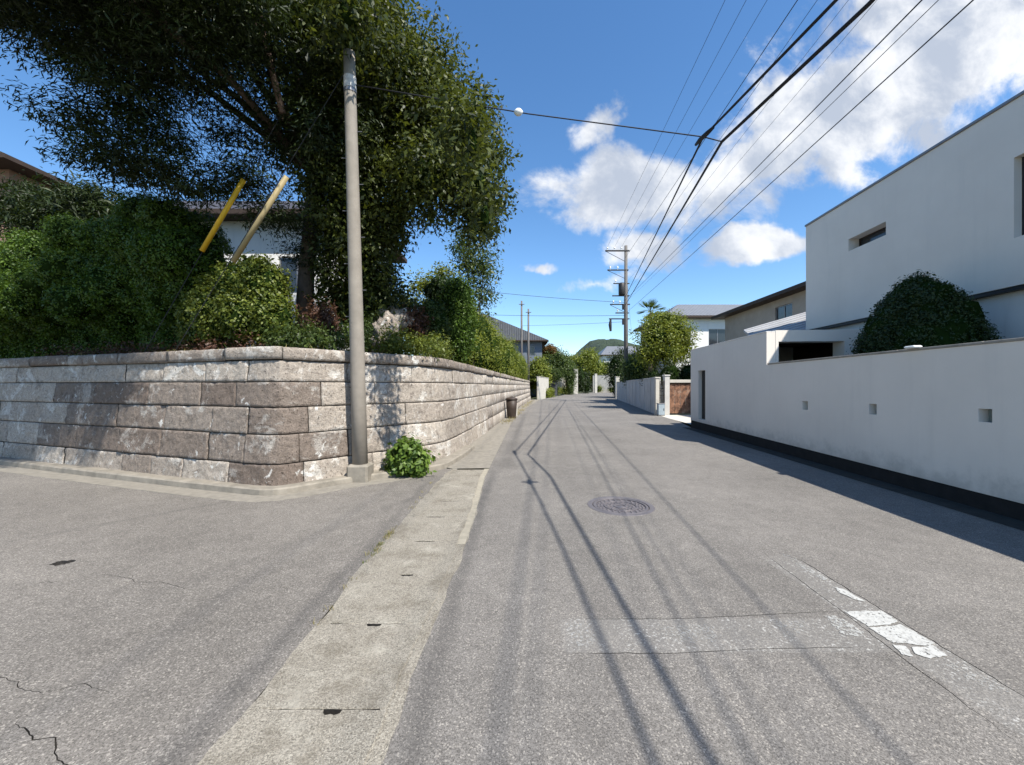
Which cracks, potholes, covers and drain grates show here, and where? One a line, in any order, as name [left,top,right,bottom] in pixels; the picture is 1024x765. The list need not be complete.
manhole cover [587,496,655,516]
crack [0,677,110,693]
crack [15,722,69,765]
